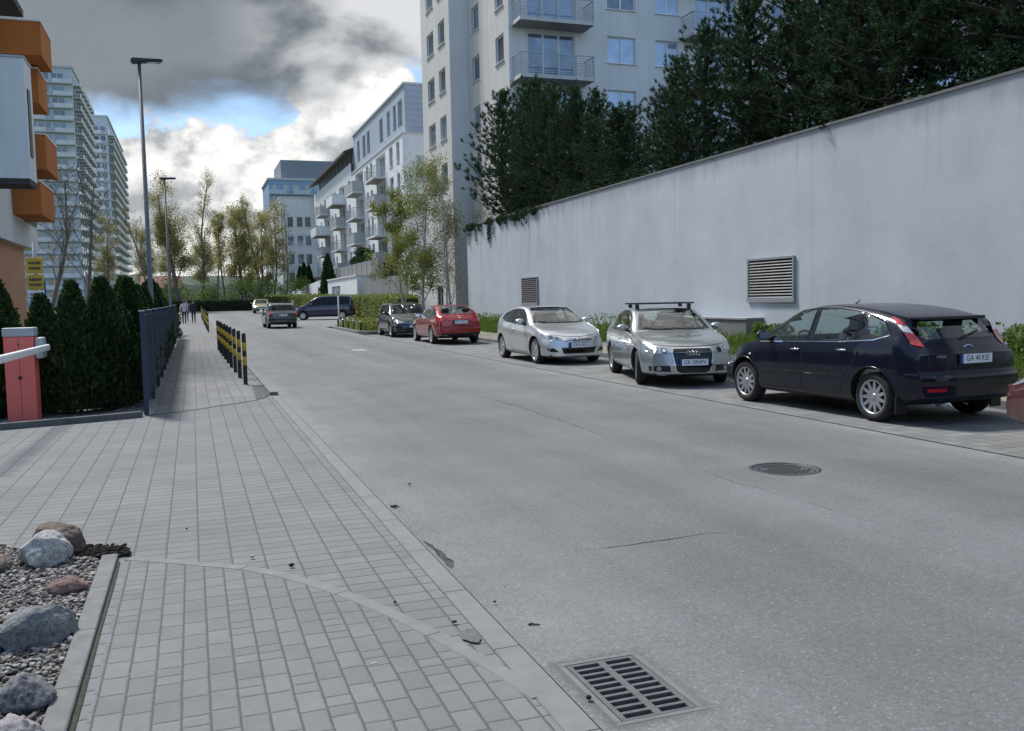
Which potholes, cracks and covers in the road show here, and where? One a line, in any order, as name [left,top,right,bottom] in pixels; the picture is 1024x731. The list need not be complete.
crack [599,532,724,549]
manhole cover [748,462,822,476]
pothole [423,541,454,569]
drain grate [557,652,707,731]
